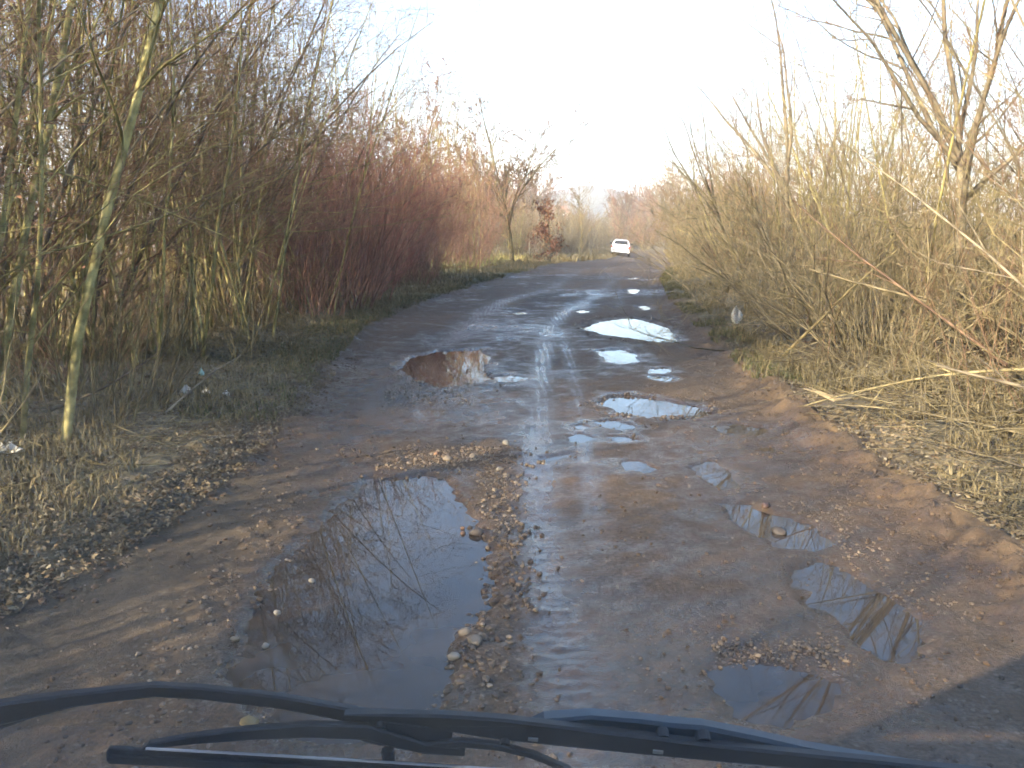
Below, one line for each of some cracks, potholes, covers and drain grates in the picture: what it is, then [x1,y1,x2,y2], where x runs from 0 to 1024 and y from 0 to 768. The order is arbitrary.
pothole [687,458,747,489]
pothole [393,348,495,387]
pothole [781,557,939,665]
pothole [563,432,599,443]
pothole [594,394,723,418]
pothole [592,348,642,364]
pothole [581,317,681,343]
pothole [206,470,506,750]
pothole [691,650,855,731]
pothole [709,499,849,552]
pothole [614,459,660,473]
